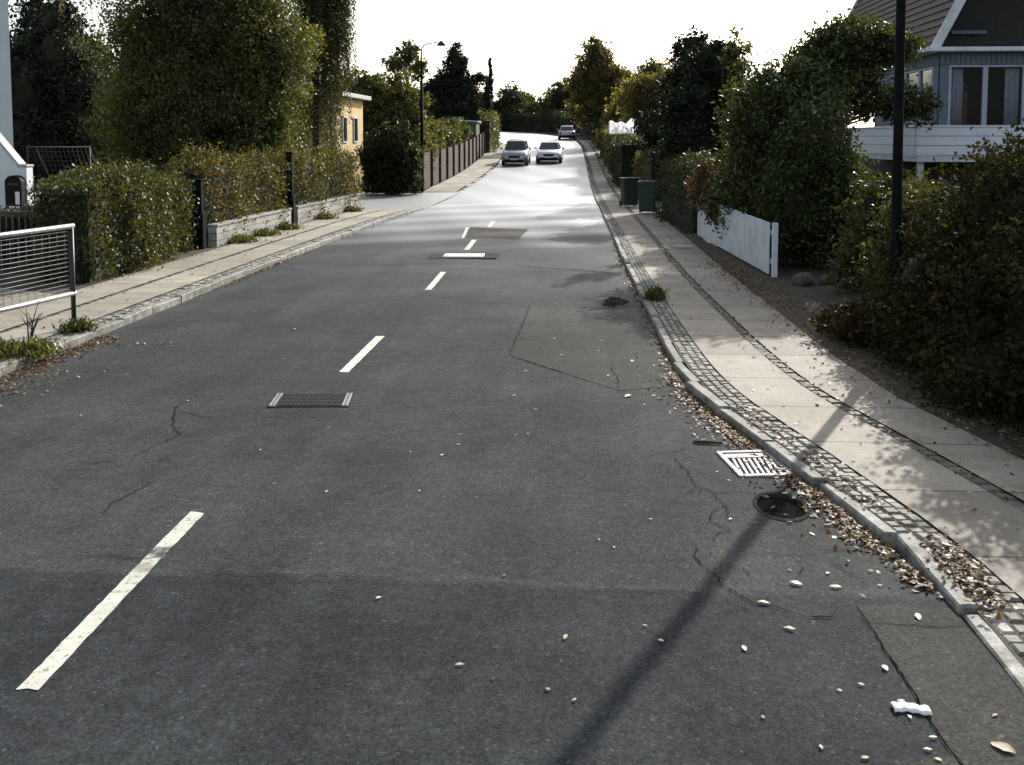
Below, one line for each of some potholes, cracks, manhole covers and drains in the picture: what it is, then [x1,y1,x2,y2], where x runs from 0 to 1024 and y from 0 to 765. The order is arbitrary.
pothole [598,295,634,310]
manhole cover [266,393,355,408]
crack [673,449,869,616]
manhole cover [752,491,811,522]
drain grate [716,450,795,478]
crack [92,401,211,463]
